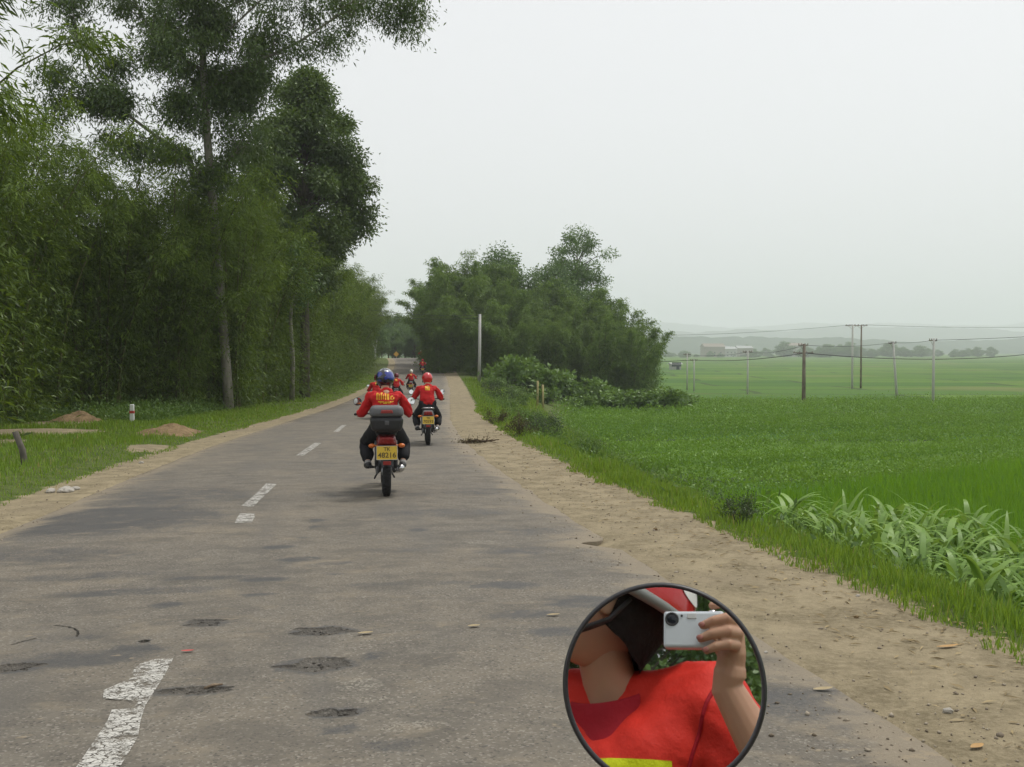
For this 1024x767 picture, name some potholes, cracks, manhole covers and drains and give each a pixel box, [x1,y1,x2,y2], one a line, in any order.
pothole [157,686,234,695]
pothole [270,657,353,673]
pothole [0,662,49,673]
pothole [288,626,361,637]
pothole [306,708,358,717]
pothole [183,619,228,627]
